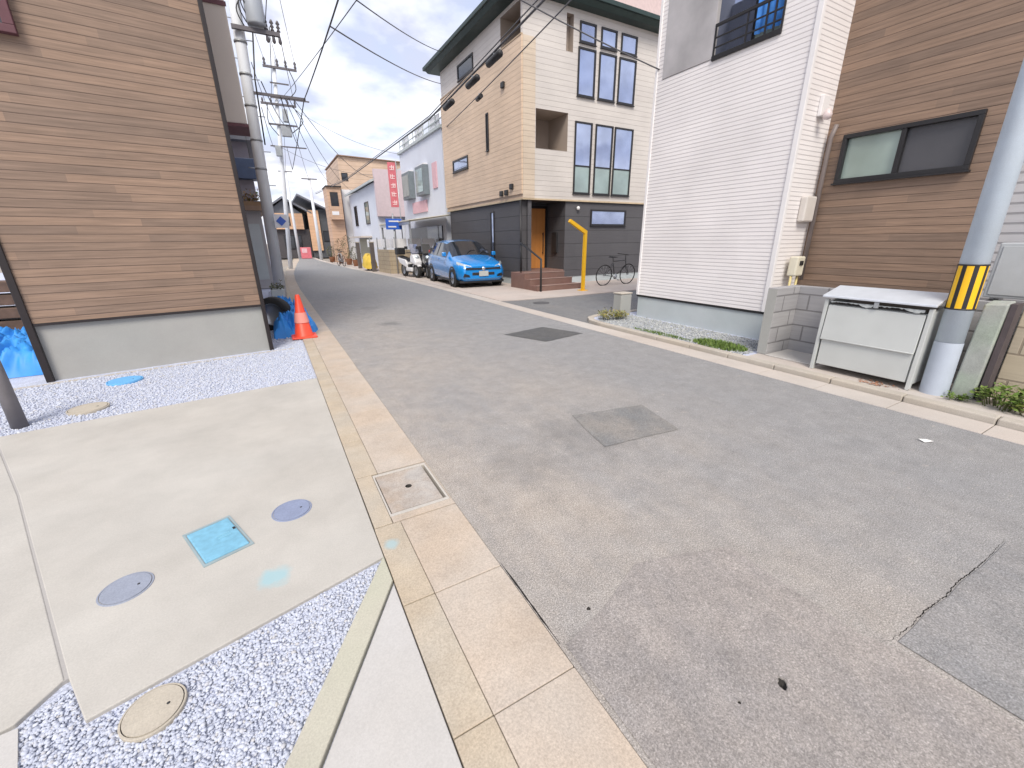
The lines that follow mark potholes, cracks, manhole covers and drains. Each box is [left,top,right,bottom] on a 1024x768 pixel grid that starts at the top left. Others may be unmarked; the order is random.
manhole cover [96,571,155,607]
manhole cover [372,463,450,518]
manhole cover [182,515,254,568]
manhole cover [271,499,312,522]
manhole cover [117,683,188,743]
manhole cover [65,402,110,416]
manhole cover [106,376,144,387]
